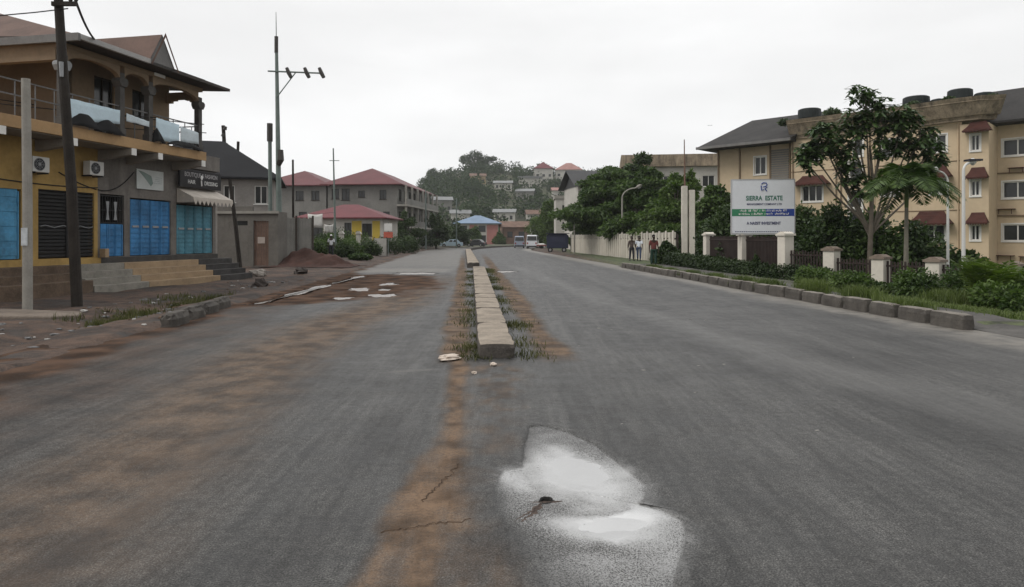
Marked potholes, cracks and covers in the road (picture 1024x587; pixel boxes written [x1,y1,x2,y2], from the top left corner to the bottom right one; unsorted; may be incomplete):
pothole [449,417,734,587]
crack [380,463,471,533]
